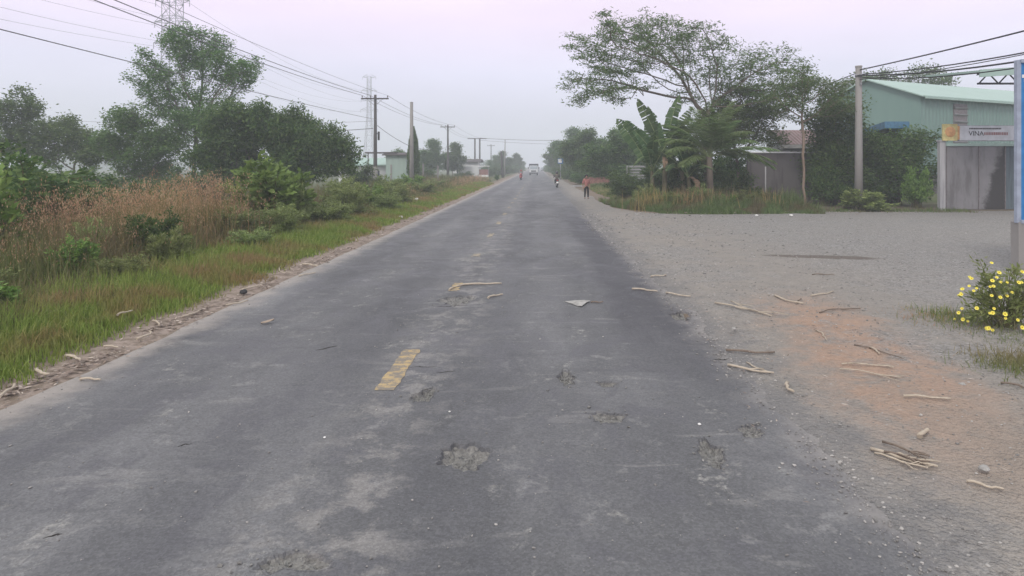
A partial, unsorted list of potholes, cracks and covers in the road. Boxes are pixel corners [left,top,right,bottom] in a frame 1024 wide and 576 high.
pothole [548,369,576,391]
pothole [584,406,631,428]
pothole [691,435,728,471]
pothole [399,386,439,403]
pothole [727,422,766,440]
pothole [595,380,627,390]
pothole [217,548,336,576]
pothole [660,307,692,322]
pothole [432,295,478,307]
pothole [433,441,496,473]
